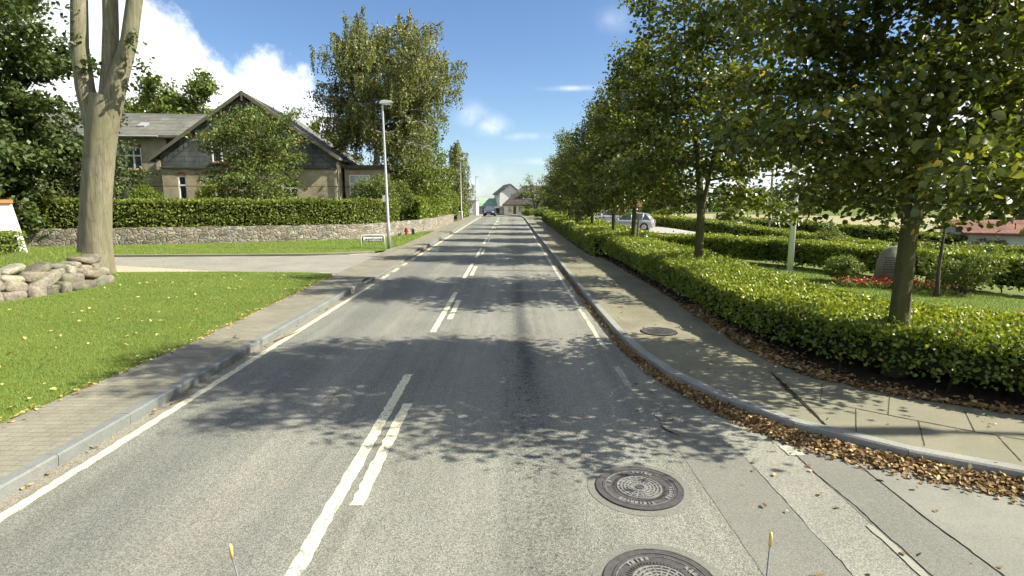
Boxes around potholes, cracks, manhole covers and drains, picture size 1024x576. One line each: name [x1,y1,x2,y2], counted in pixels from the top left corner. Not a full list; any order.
manhole cover [587,464,693,517]
manhole cover [640,327,678,336]
manhole cover [592,544,723,576]
